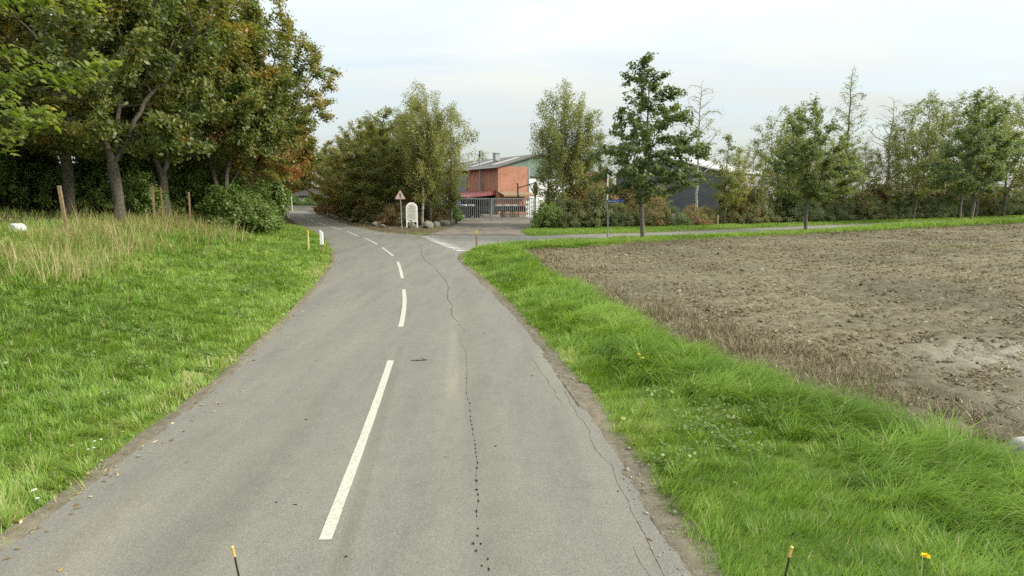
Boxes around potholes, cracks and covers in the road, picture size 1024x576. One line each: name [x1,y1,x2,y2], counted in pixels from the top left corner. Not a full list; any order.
crack [416,242,490,571]
crack [530,358,664,576]
